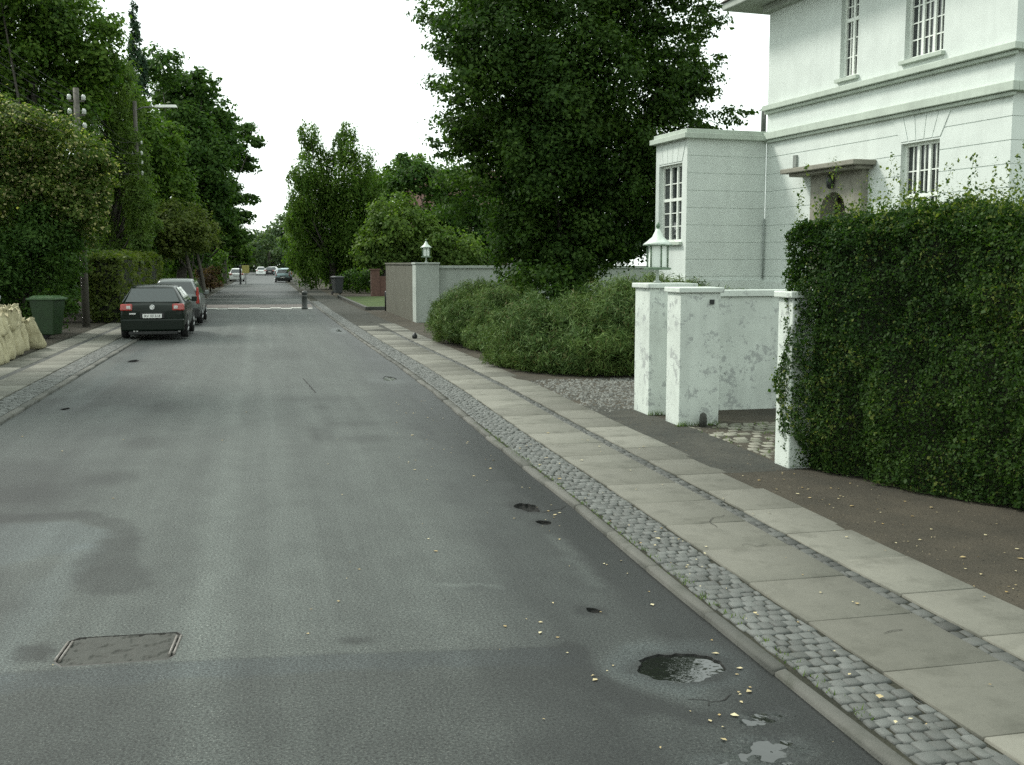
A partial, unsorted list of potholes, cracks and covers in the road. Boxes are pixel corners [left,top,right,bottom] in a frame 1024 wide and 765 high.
manhole cover [53,632,183,667]
pothole [514,503,540,512]
pothole [637,653,726,683]
